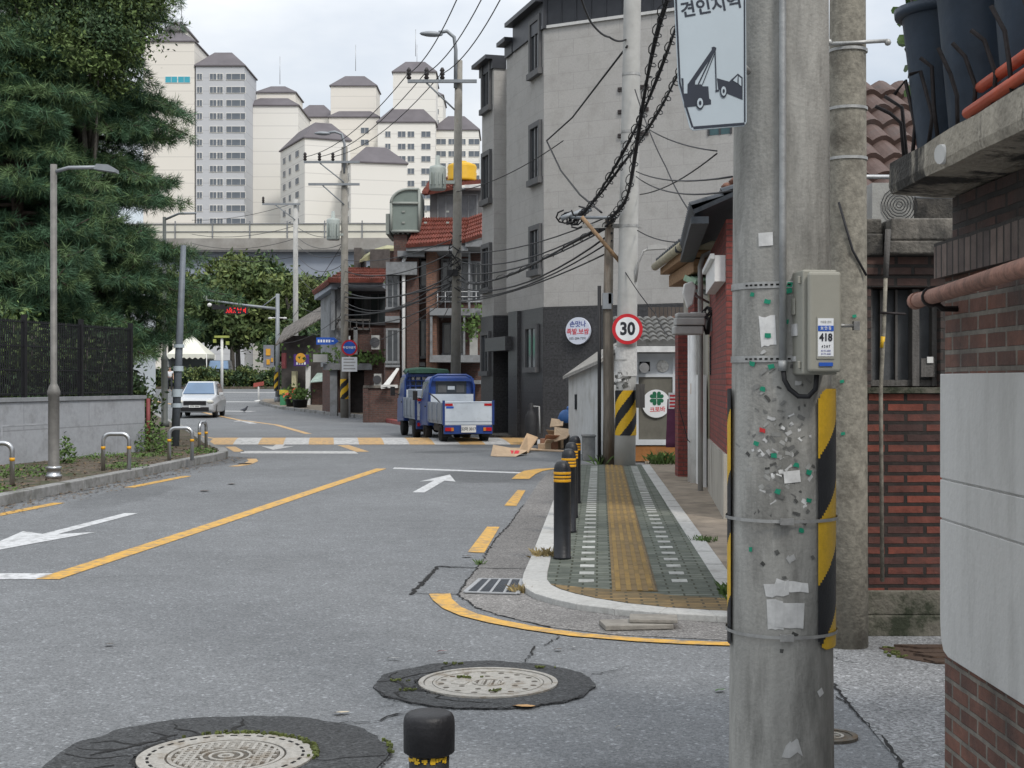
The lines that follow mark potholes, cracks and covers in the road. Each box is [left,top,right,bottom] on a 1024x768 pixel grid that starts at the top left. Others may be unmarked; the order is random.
drain grate [463,578,522,595]
manhole cover [373,660,596,710]
manhole cover [42,716,395,768]
manhole cover [834,728,858,745]
crack [409,566,476,594]
